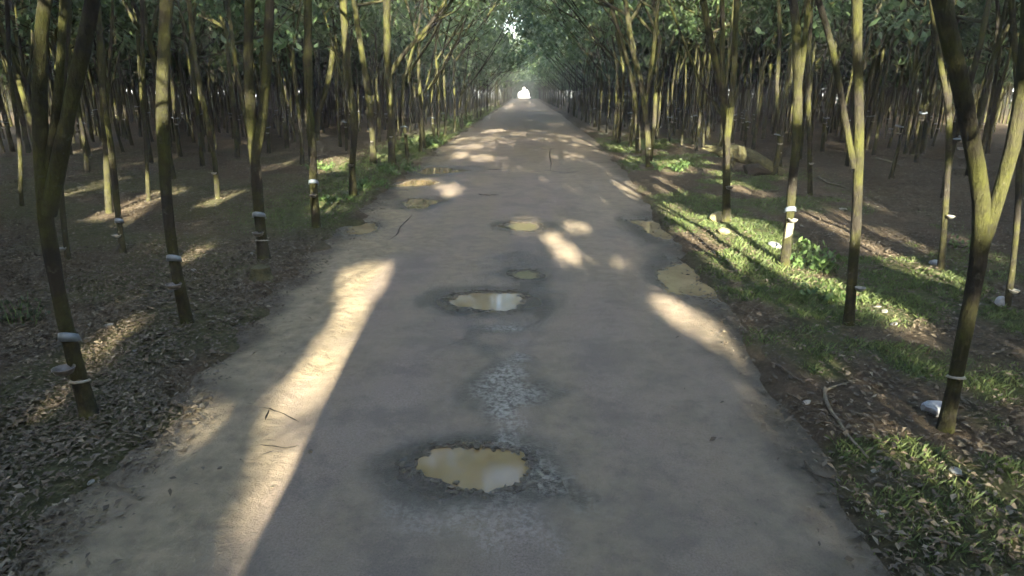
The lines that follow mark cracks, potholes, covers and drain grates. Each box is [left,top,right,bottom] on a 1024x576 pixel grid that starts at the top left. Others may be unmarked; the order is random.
pothole [391,177,441,187]
pothole [651,261,718,299]
pothole [438,288,533,315]
pothole [398,197,445,210]
pothole [499,220,543,232]
pothole [398,440,550,499]
pothole [417,165,471,176]
pothole [621,217,674,244]
pothole [506,268,543,281]
pothole [343,221,381,235]
